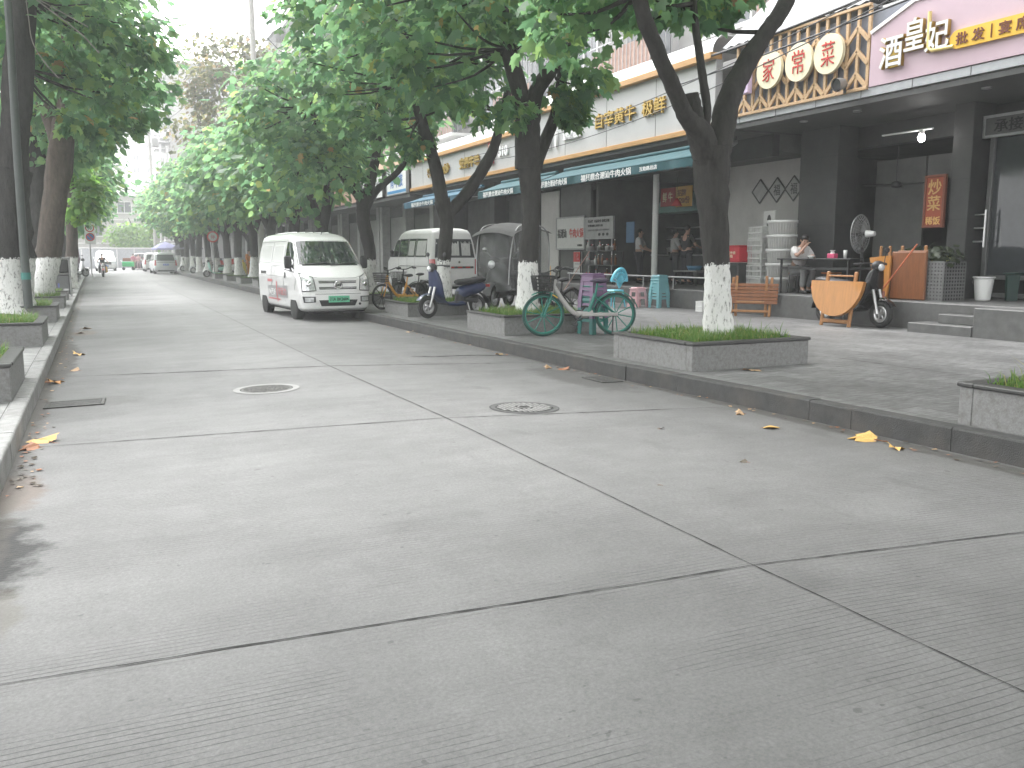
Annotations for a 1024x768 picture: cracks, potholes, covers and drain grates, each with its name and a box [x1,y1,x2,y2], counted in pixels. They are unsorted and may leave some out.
manhole cover [489,402,559,413]
manhole cover [233,384,299,394]
drain grate [43,398,106,409]
